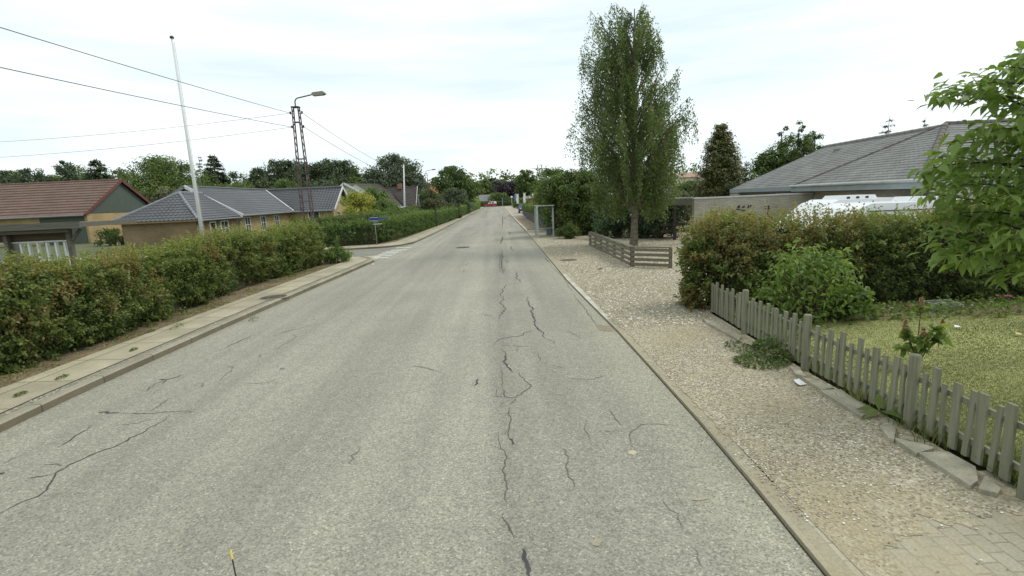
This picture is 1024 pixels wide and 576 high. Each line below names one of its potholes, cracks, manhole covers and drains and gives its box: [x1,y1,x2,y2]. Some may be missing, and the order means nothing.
crack [0,375,190,512]
crack [495,373,532,407]
crack [562,410,665,491]
